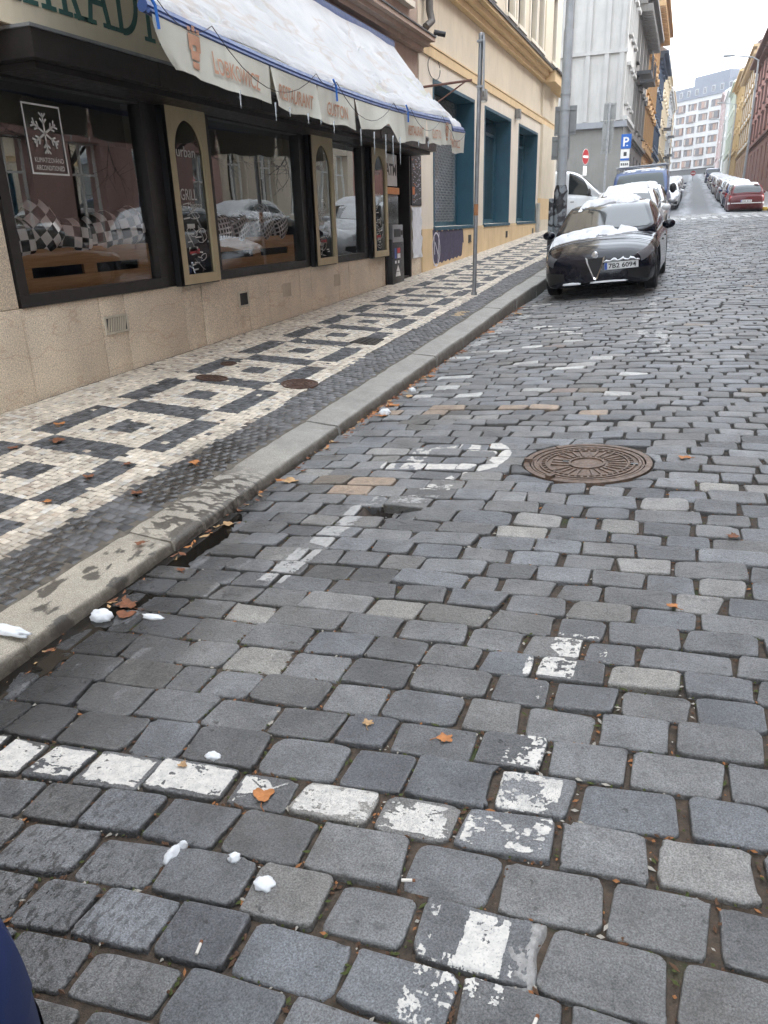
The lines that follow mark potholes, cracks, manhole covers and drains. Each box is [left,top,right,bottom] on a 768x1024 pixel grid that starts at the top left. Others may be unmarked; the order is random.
manhole cover [195,374,228,382]
manhole cover [524,444,653,487]
manhole cover [281,379,319,389]
